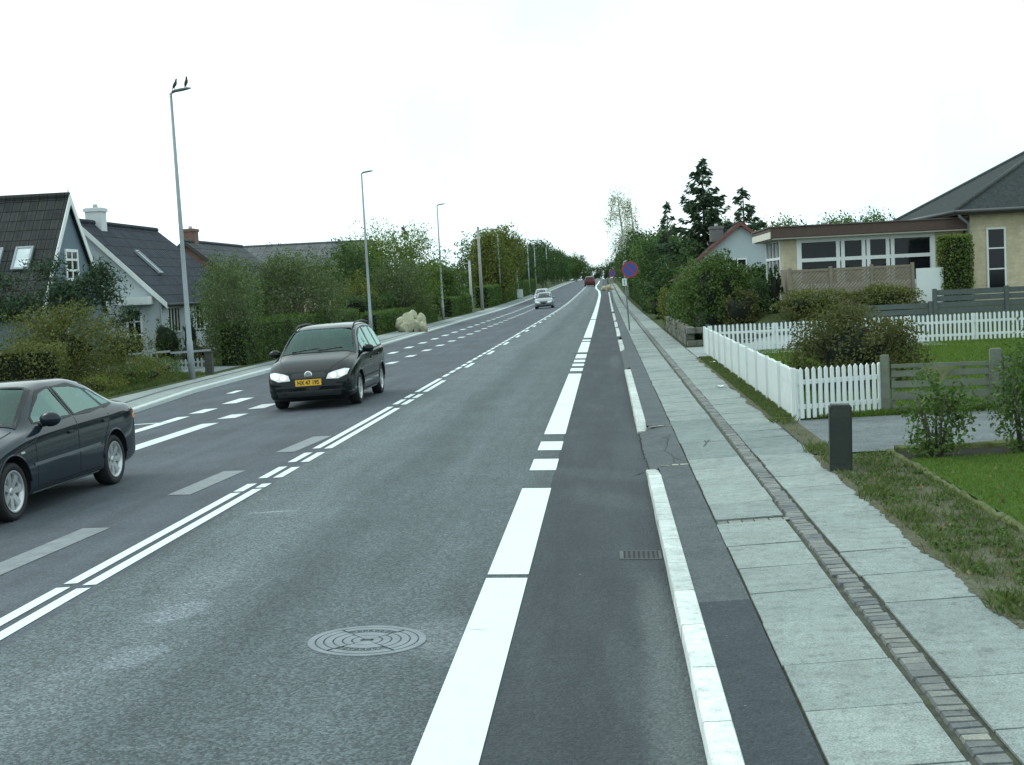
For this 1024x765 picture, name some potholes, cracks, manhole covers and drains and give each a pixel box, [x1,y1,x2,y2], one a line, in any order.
drain grate [619,550,662,560]
manhole cover [307,625,426,657]
